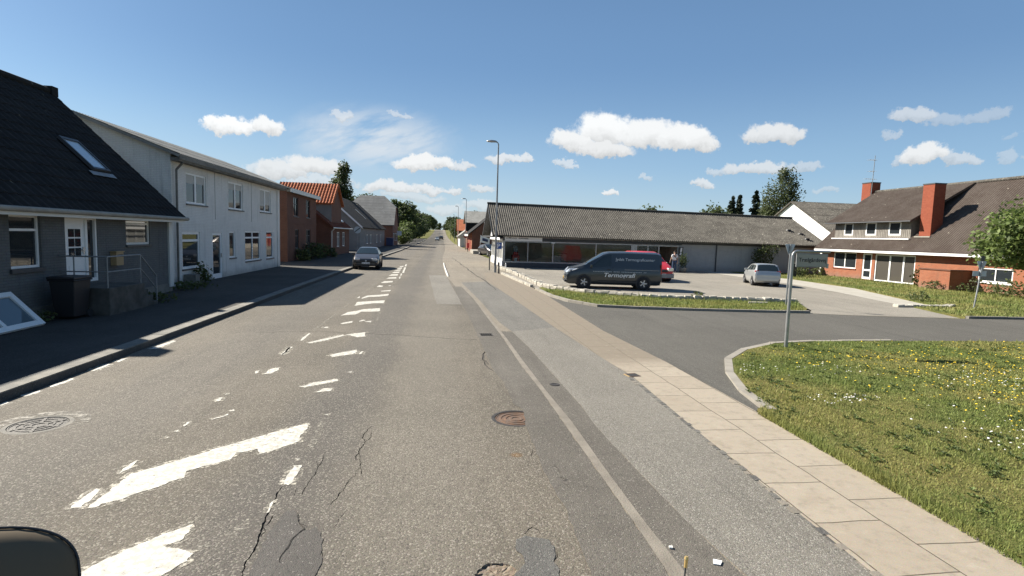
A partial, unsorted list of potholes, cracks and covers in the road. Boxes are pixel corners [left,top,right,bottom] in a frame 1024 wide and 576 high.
manhole cover [491,410,525,427]
manhole cover [0,415,75,435]
crack [330,427,372,527]
crack [241,457,324,576]
